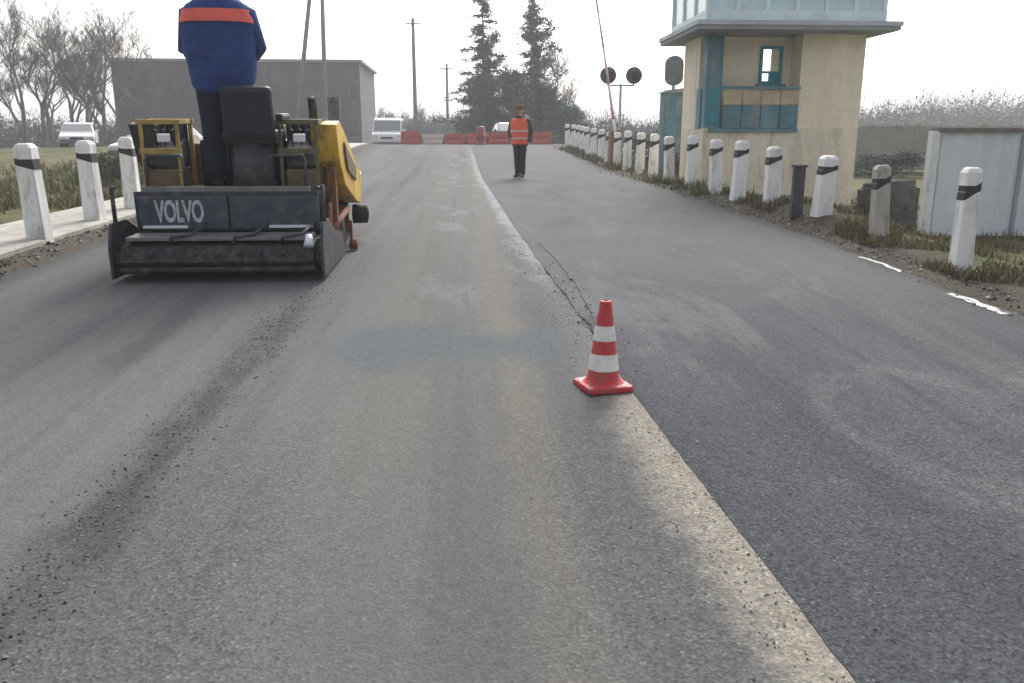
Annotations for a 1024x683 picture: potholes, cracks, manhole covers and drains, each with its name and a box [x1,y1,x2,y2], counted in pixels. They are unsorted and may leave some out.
crack [507,216,857,683]
